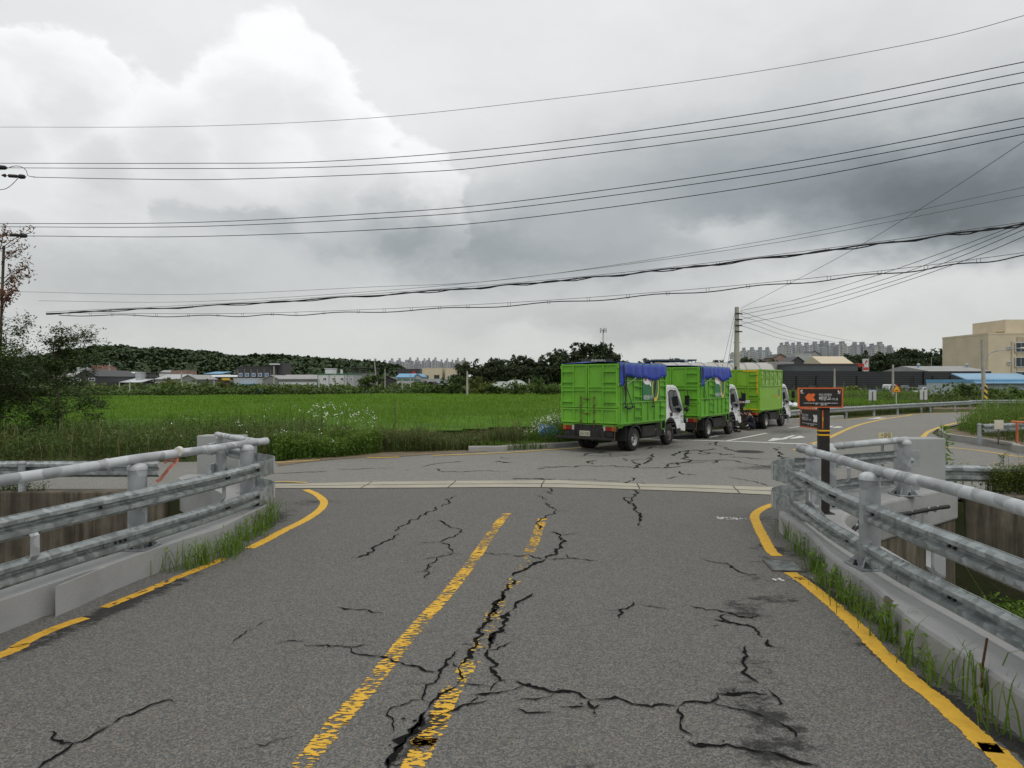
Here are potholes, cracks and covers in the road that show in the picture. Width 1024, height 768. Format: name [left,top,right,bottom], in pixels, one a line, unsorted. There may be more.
crack [427,442,785,526]
crack [38,699,173,768]
crack [269,495,821,768]
